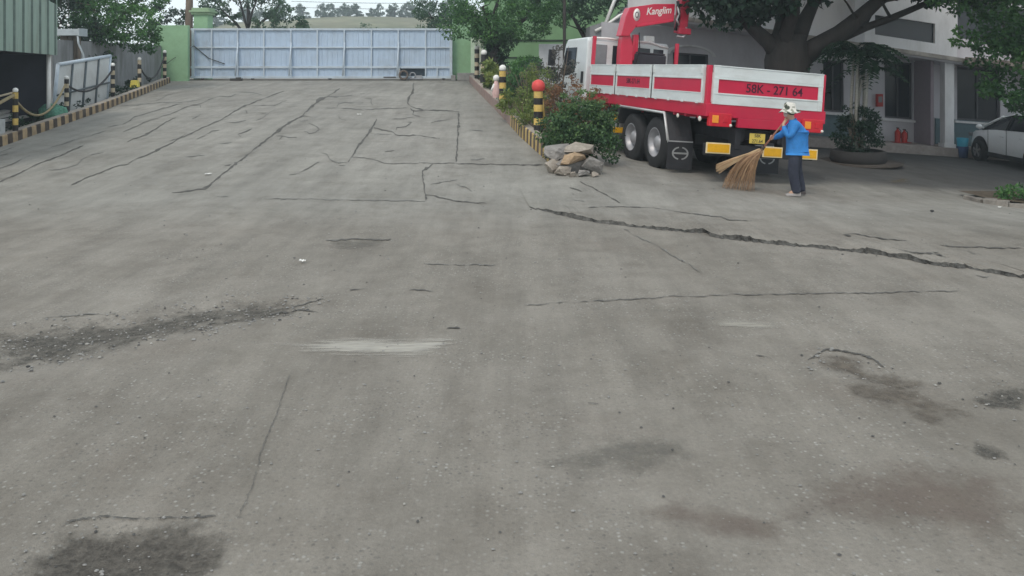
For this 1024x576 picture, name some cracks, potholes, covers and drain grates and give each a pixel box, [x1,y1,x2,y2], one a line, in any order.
crack [65,514,216,524]
crack [422,164,484,203]
crack [519,181,1024,305]
pothole [7,306,272,366]
crack [808,348,884,367]
crack [240,375,290,513]
crack [319,93,449,152]
crack [0,91,320,185]
